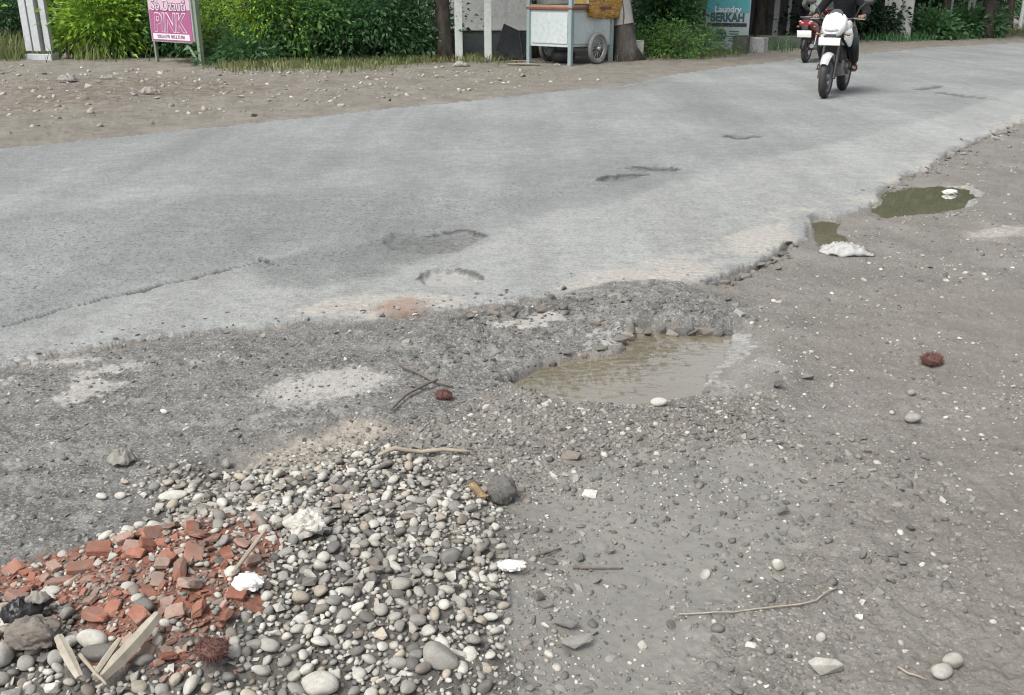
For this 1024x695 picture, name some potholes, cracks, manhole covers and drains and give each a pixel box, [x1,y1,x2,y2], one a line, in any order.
pothole [418,266,481,288]
pothole [862,182,980,219]
pothole [506,314,739,406]
pothole [380,228,488,256]
pothole [600,173,646,183]
crack [4,256,276,327]
pothole [630,164,678,173]
pothole [805,210,879,254]
